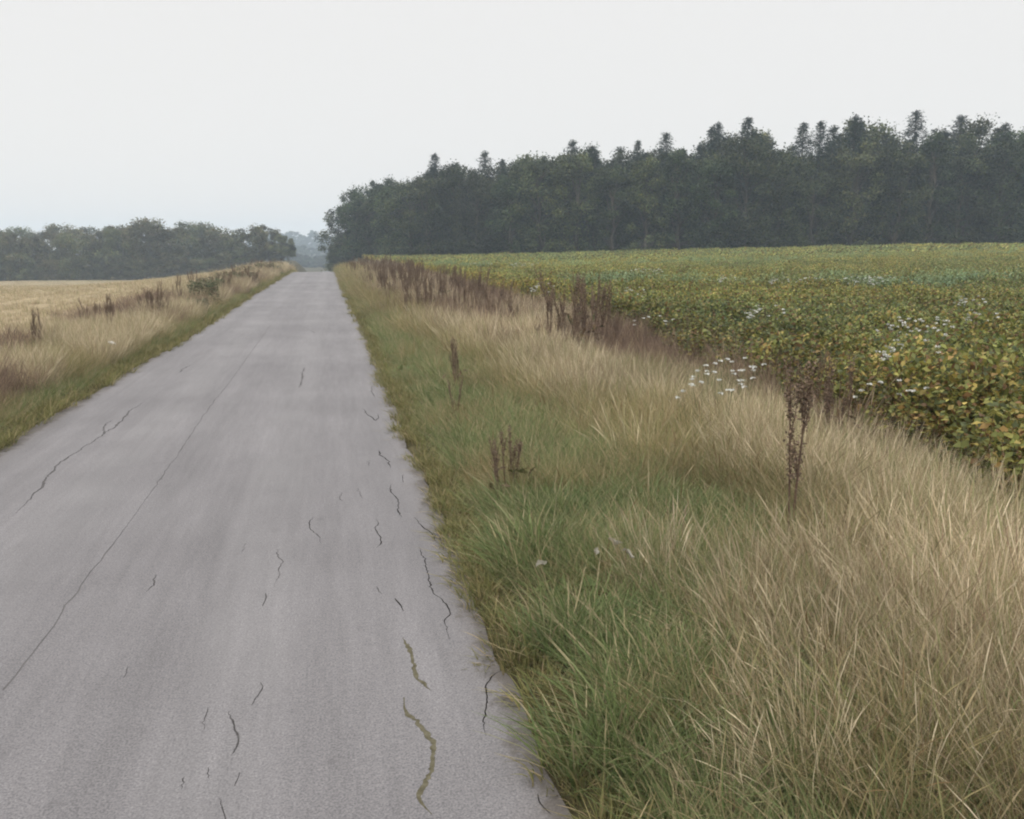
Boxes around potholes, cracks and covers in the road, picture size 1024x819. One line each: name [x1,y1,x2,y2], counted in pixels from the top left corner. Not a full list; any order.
crack [482,672,498,733]
crack [8,404,141,518]
crack [368,451,451,814]
crack [228,682,263,754]
